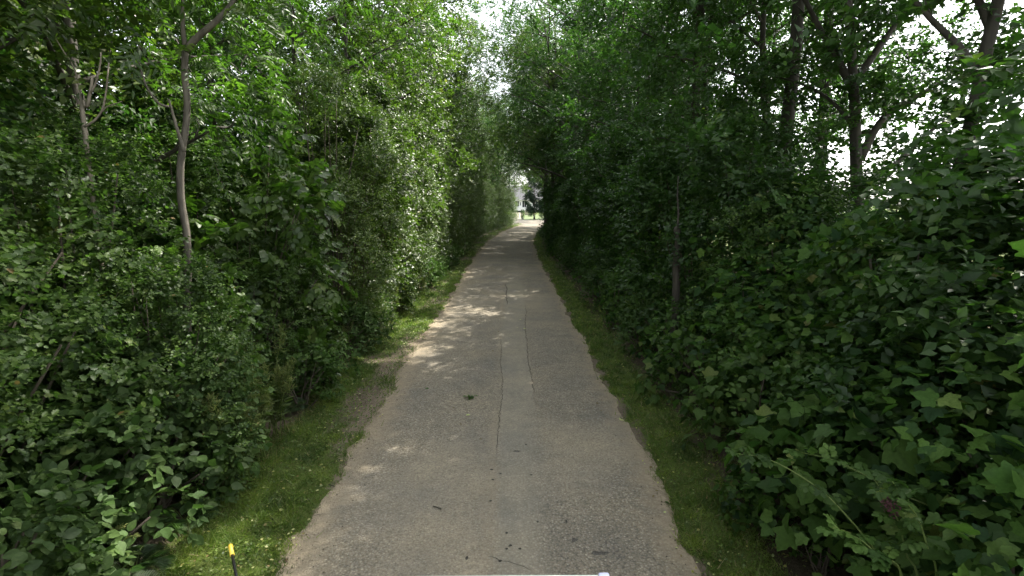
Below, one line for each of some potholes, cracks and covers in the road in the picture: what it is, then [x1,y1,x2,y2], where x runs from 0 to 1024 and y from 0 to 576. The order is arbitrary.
crack [505,285,537,411]
